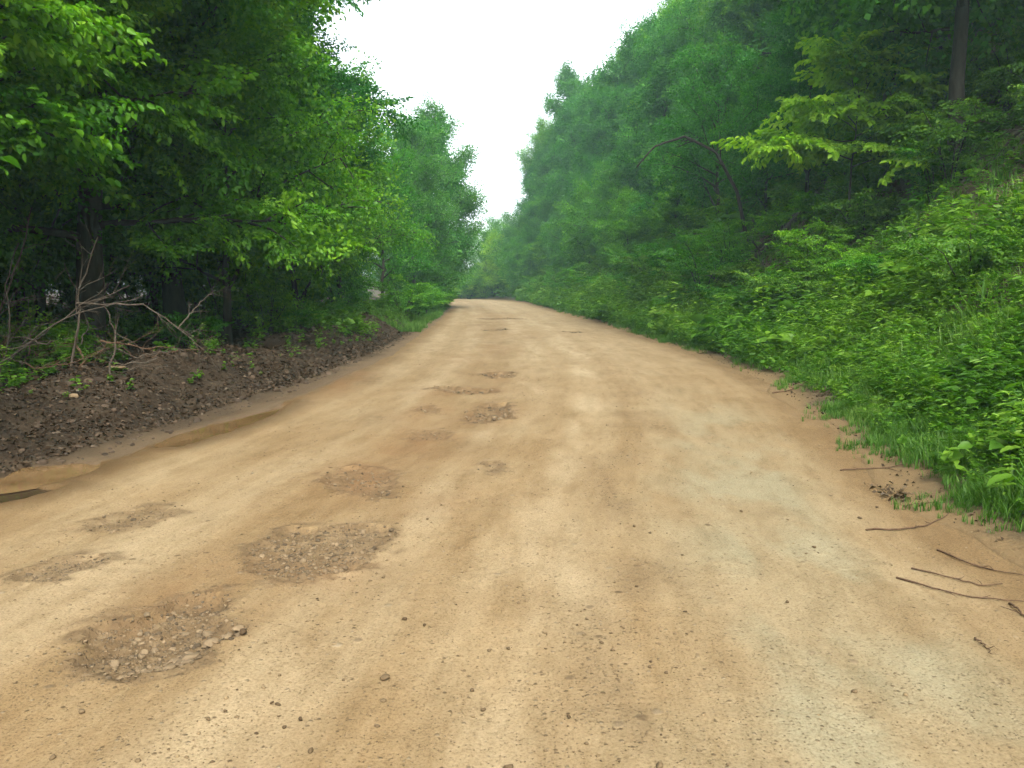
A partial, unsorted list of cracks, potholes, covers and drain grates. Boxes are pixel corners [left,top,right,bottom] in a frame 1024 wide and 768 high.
pothole [236,523,401,589]
pothole [8,553,113,583]
pothole [409,429,455,442]
pothole [319,464,401,500]
pothole [477,460,507,473]
pothole [58,587,249,683]
pothole [81,502,180,533]
pothole [417,405,441,415]
pothole [429,385,499,395]
pothole [479,371,515,379]
pothole [458,402,515,424]
